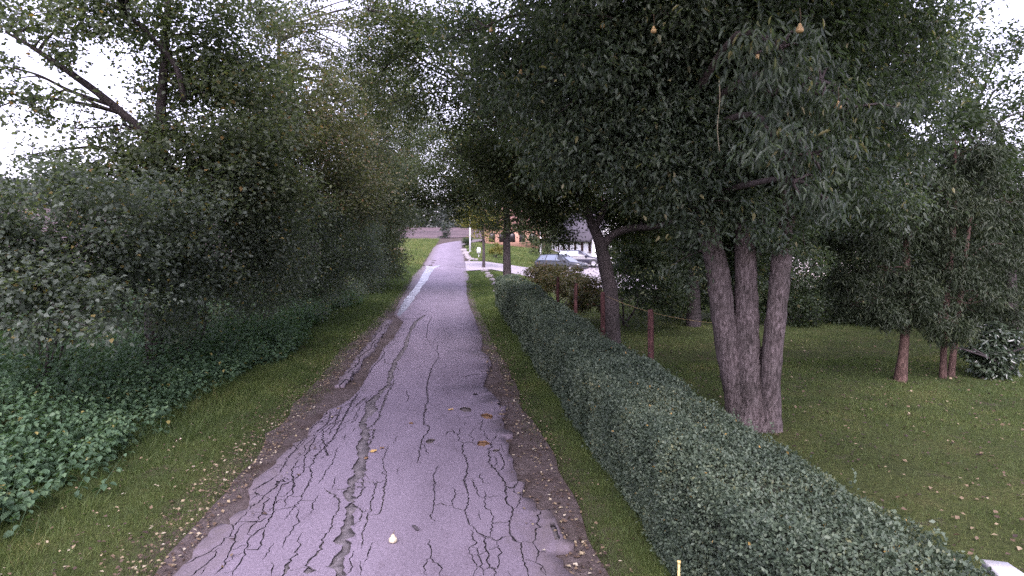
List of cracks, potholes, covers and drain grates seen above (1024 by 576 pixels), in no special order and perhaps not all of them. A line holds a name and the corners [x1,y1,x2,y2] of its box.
crack [185,315,546,576]
